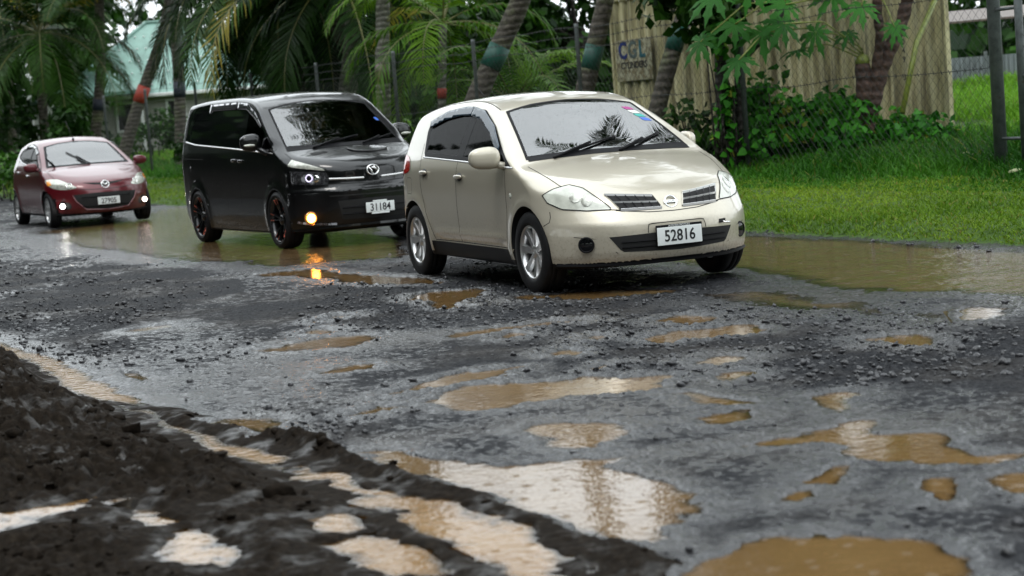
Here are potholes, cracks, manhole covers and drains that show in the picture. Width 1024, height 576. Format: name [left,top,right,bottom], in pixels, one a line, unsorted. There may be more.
pothole [231,330,395,353]
pothole [401,286,498,311]
pothole [905,471,976,505]
pothole [346,443,726,547]
pothole [716,413,1024,469]
pothole [409,369,688,414]
pothole [508,417,641,450]
pothole [623,317,785,345]
pothole [666,523,994,576]
